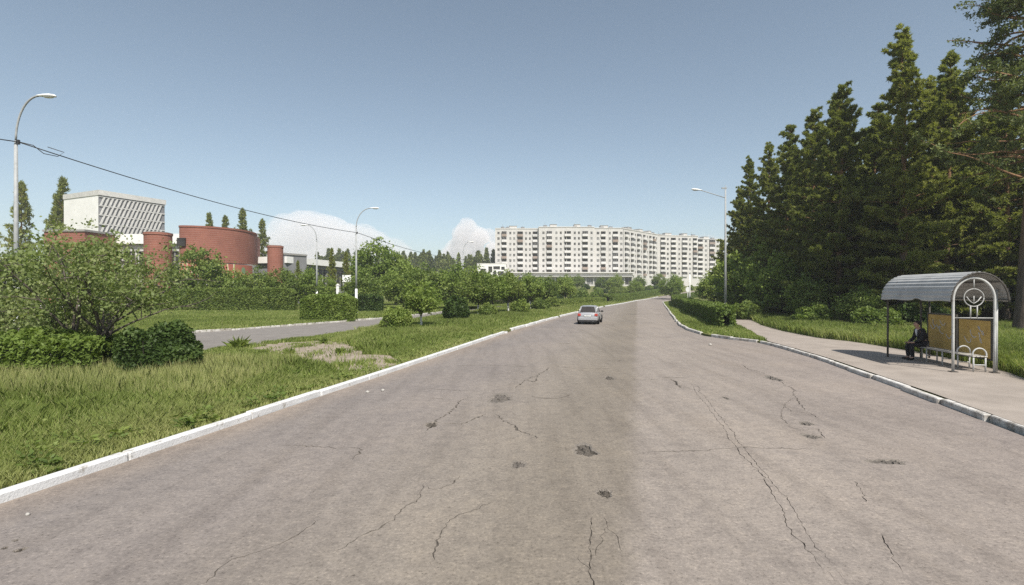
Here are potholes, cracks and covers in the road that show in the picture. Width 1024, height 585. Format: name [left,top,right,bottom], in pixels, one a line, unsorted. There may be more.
crack [659,366,825,452]
crack [578,518,622,585]
pothole [595,488,612,498]
crack [203,520,316,584]
crack [418,389,537,439]
pothole [487,393,513,403]
crack [516,369,570,399]
crack [333,476,460,552]
pothole [571,442,601,457]
crack [430,504,488,564]
